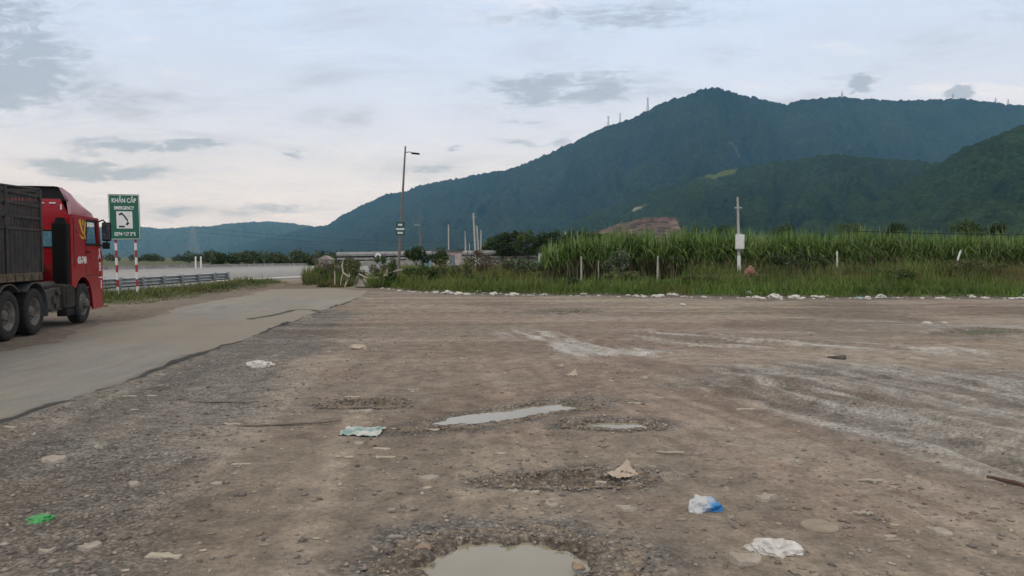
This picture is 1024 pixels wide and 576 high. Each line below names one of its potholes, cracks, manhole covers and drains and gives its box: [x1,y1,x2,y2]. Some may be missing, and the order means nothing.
pothole [322,397,407,409]
pothole [366,525,646,576]
pothole [399,398,604,432]
pothole [560,418,668,432]
pothole [481,466,658,490]
